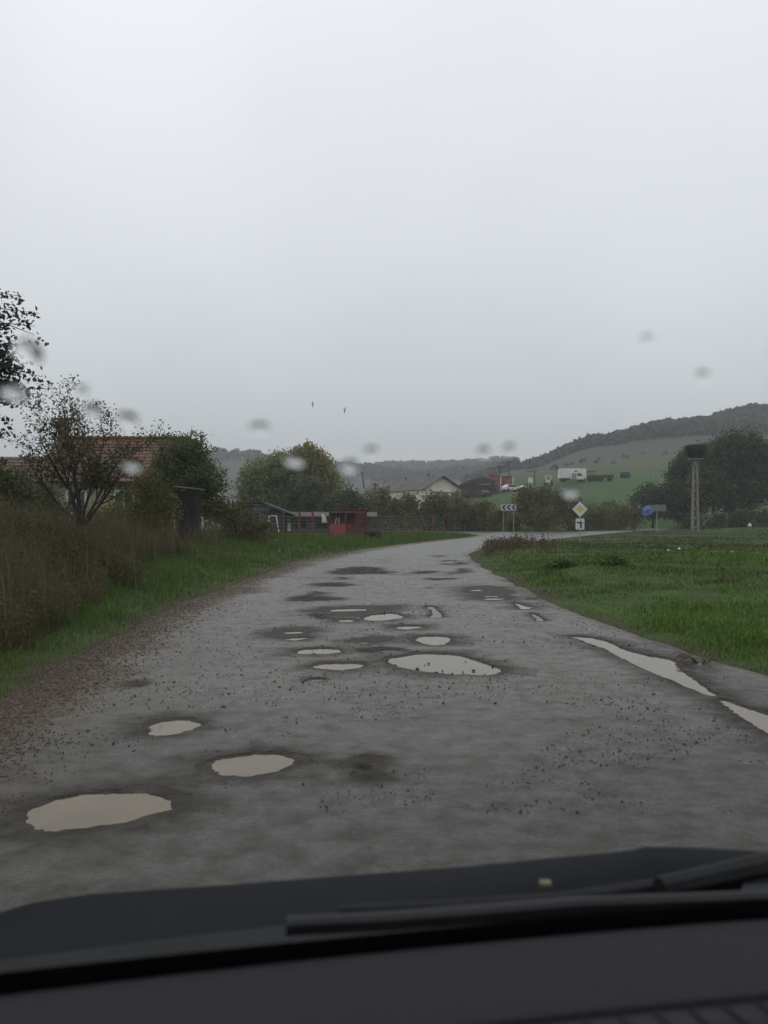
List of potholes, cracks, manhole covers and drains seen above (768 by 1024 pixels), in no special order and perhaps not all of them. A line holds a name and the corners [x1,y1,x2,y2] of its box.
pothole [329,567,395,575]
pothole [4,784,196,837]
pothole [380,651,514,675]
pothole [195,750,313,778]
pothole [140,716,208,736]
pothole [301,605,402,617]
pothole [424,606,445,618]
pothole [408,634,457,645]
pothole [461,586,516,600]
pothole [358,612,411,621]
pothole [306,661,371,671]
